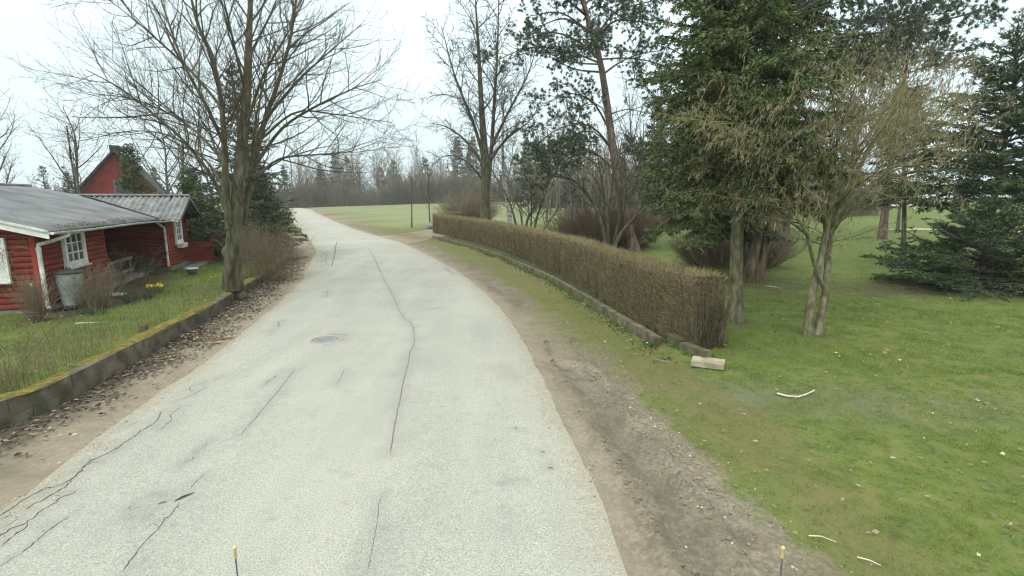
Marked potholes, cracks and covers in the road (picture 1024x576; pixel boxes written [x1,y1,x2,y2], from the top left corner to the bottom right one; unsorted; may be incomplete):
crack [0,383,203,566]
crack [369,250,415,452]
manhole cover [309,336,340,344]
